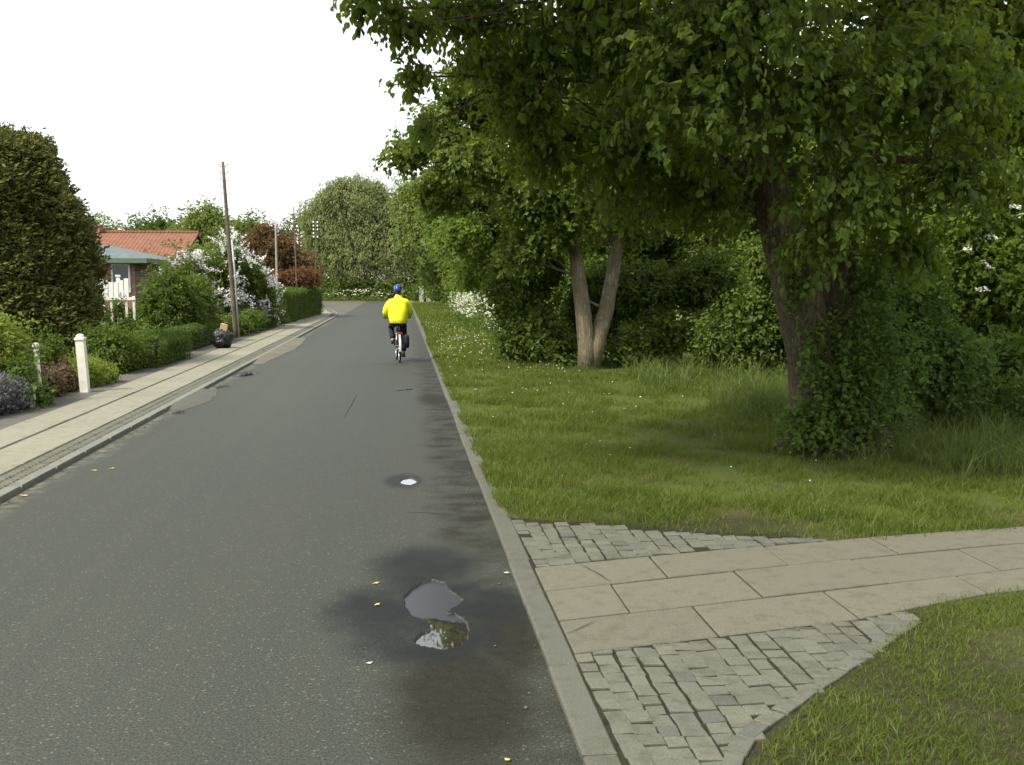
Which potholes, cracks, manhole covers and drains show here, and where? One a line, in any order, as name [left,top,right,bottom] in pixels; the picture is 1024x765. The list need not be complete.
pothole [403,579,469,650]
